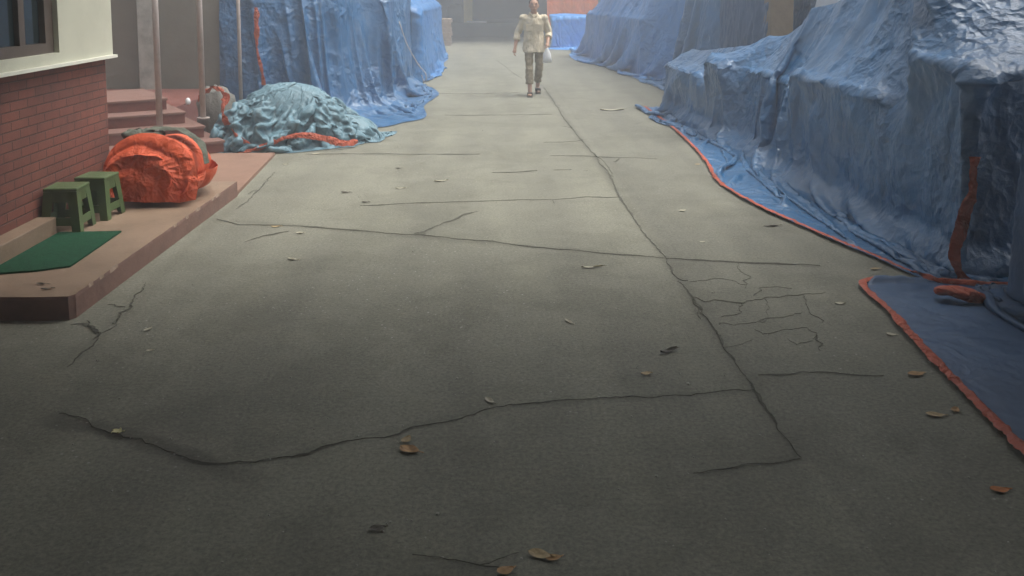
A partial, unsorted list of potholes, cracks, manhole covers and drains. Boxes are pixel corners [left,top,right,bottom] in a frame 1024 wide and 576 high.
crack [412,552,519,568]
crack [62,389,748,464]
crack [67,287,144,367]
crack [218,196,824,349]
